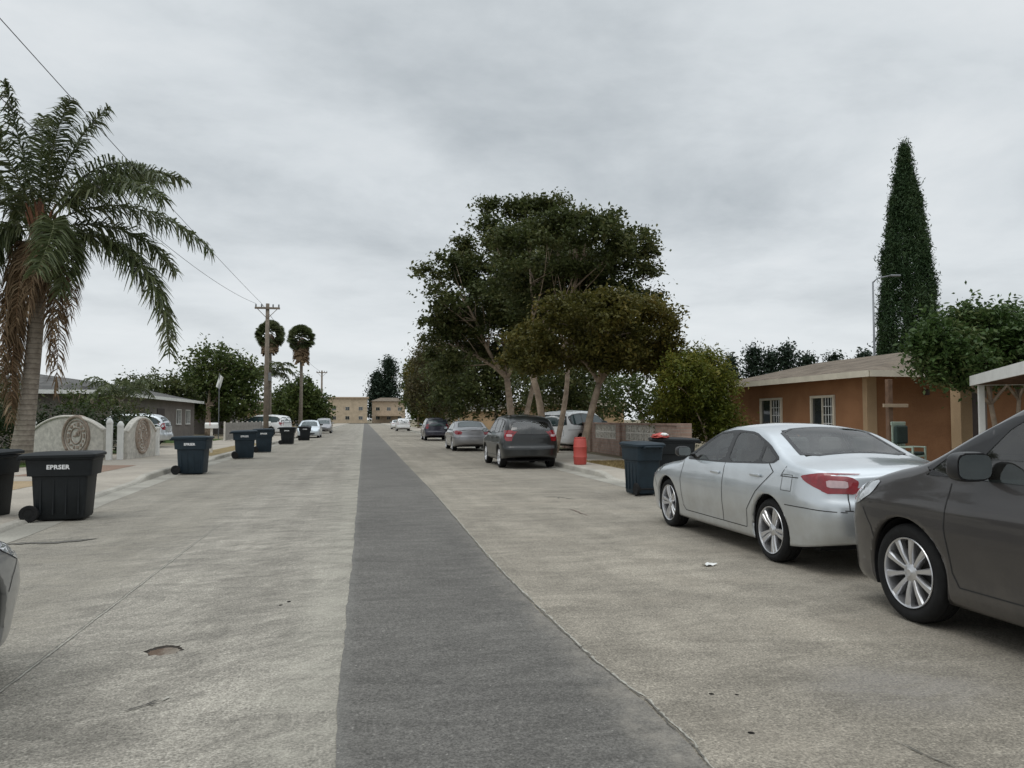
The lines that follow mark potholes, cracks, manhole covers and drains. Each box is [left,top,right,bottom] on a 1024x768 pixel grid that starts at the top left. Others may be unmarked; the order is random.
pothole [143,645,184,656]
crack [900,742,956,767]
crack [0,522,223,692]
